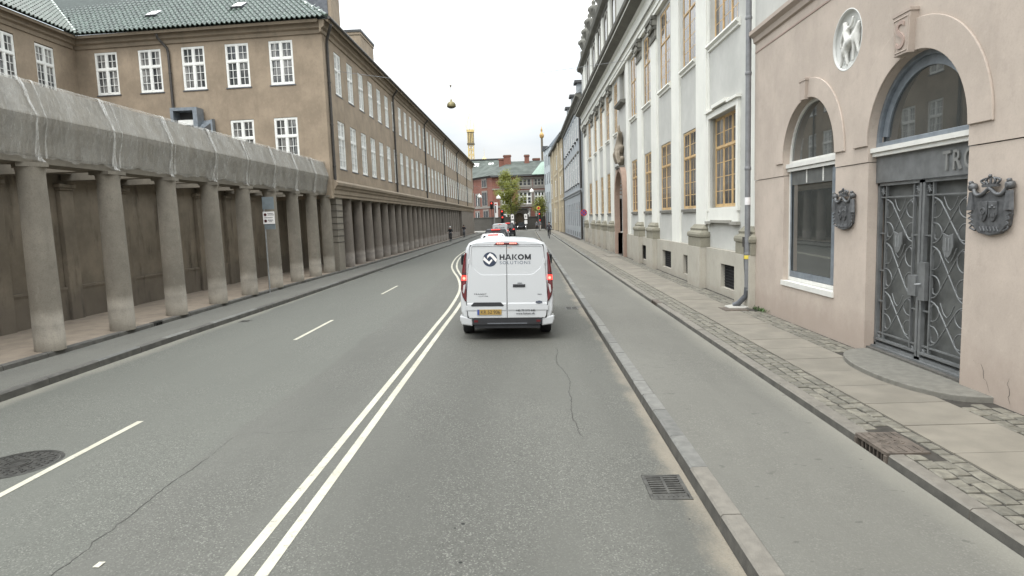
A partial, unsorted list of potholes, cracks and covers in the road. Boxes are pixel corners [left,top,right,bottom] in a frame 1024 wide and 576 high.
manhole cover [0,450,65,479]
drain grate [641,474,693,500]
crack [51,427,386,576]
